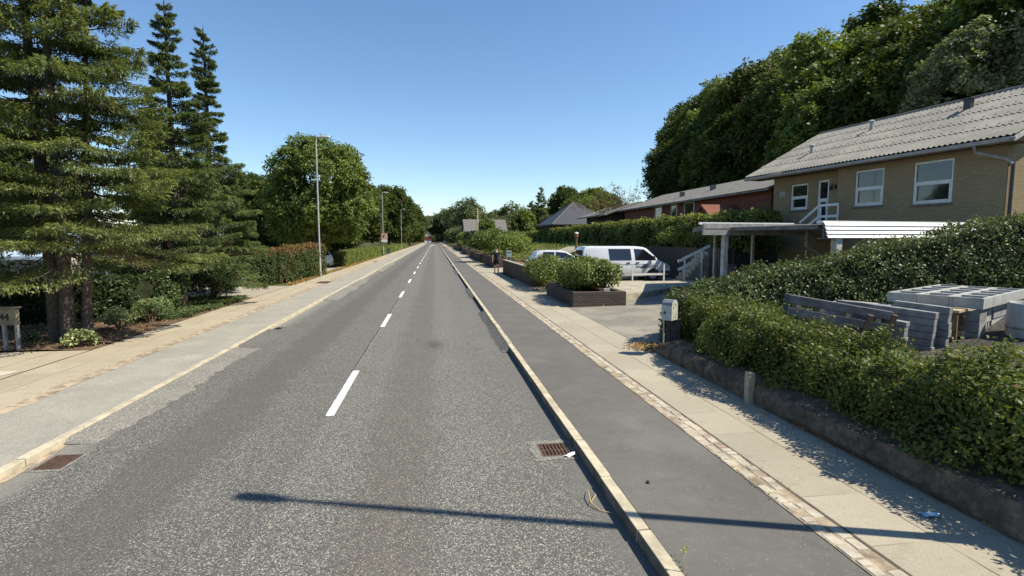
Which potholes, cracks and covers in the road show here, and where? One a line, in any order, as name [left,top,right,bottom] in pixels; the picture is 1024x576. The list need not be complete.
drain grate [30,454,84,471]
drain grate [537,442,571,457]
